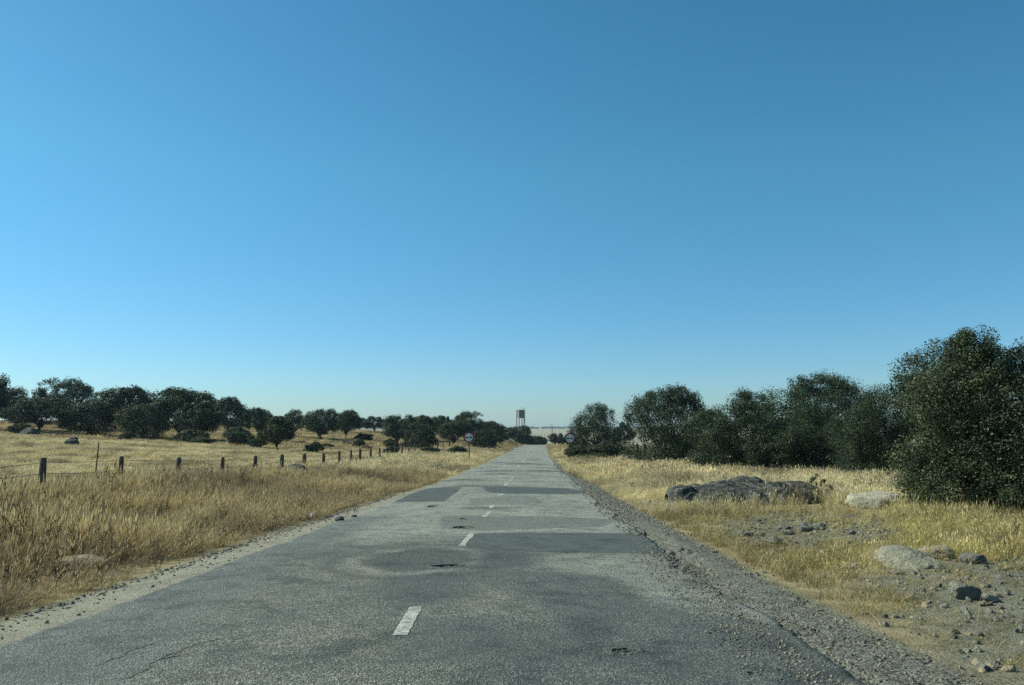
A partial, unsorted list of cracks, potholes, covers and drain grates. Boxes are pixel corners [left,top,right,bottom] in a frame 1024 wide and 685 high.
pothole [602,647,646,656]
crack [94,639,219,680]
